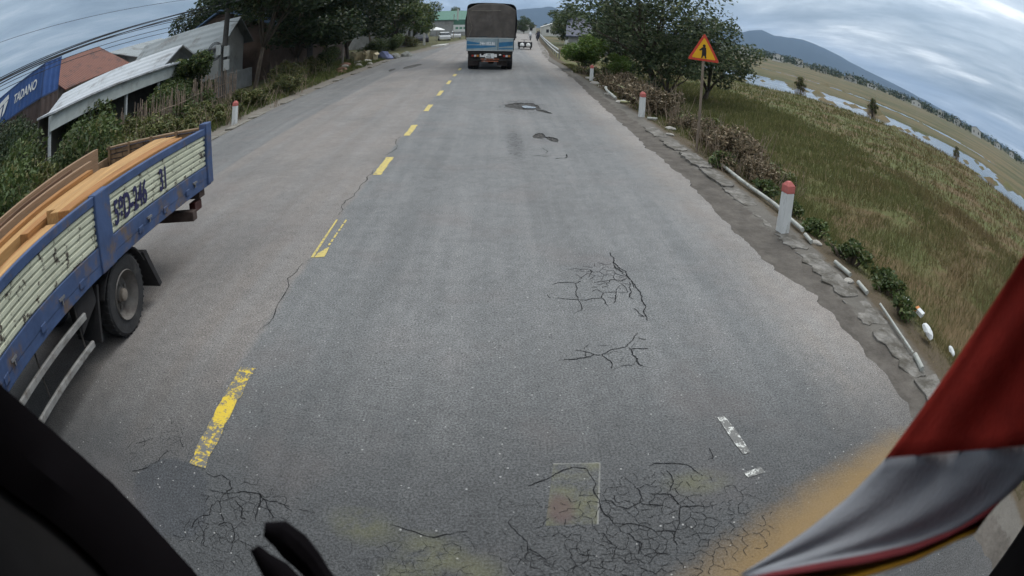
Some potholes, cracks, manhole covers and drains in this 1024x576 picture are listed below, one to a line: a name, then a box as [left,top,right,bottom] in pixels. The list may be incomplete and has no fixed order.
crack [327,447,774,576]
crack [547,253,647,319]
crack [174,472,314,572]
crack [564,335,648,369]
crack [126,416,183,471]
